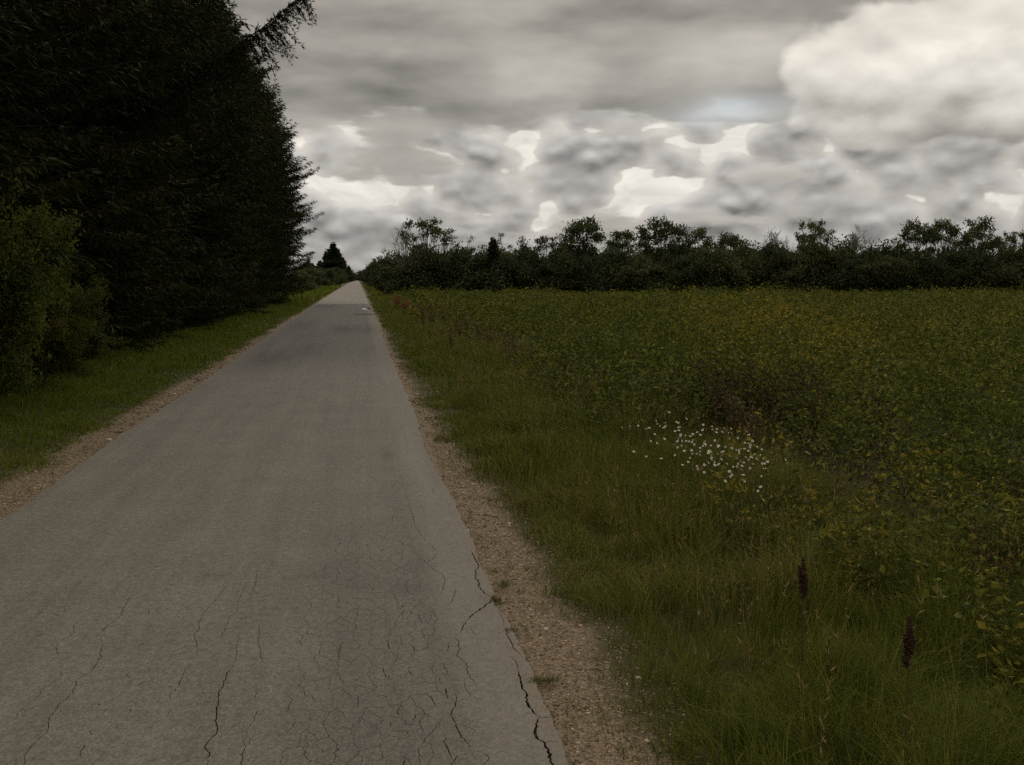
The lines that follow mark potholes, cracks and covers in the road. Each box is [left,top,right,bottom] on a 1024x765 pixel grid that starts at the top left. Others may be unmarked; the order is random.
crack [8,585,139,764]
crack [171,479,557,765]
